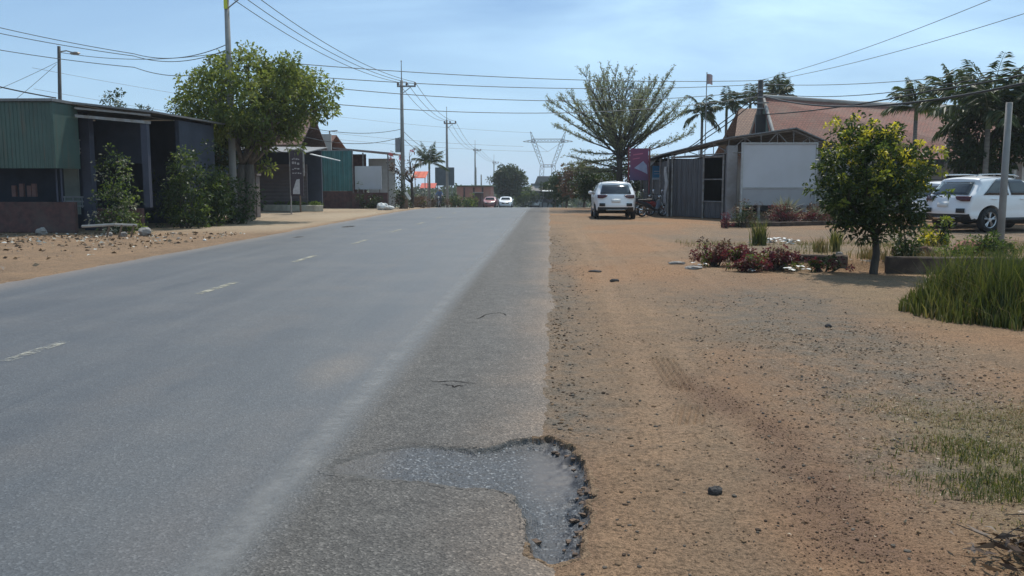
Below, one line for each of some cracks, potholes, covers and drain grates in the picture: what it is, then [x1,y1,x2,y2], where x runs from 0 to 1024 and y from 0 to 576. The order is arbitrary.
pothole [313,435,600,568]
